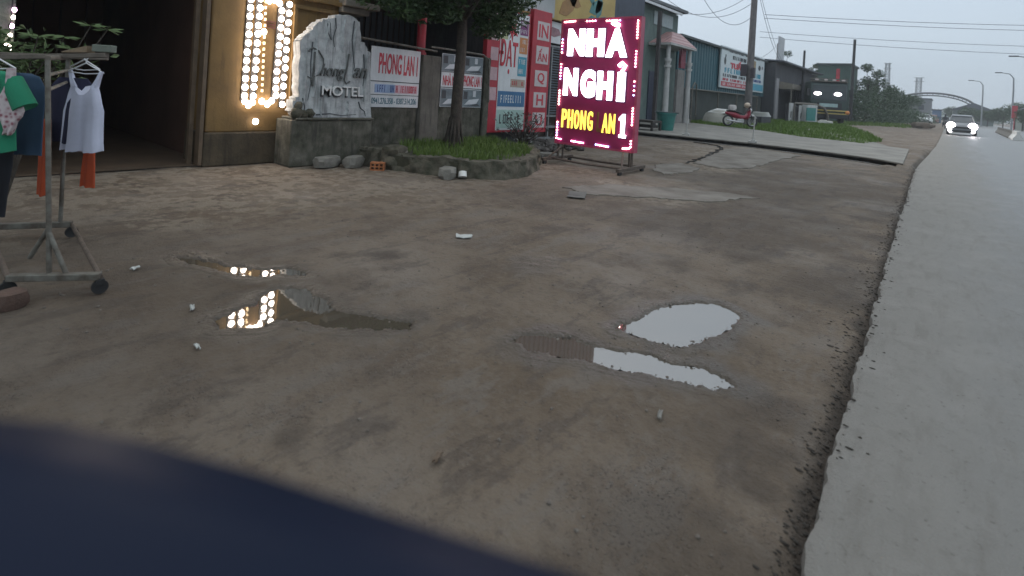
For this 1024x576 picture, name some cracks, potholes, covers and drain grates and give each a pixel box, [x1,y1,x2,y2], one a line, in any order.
pothole [601,296,757,356]
pothole [164,253,321,281]
pothole [497,327,752,398]
crack [687,142,723,164]
pothole [199,282,425,337]
